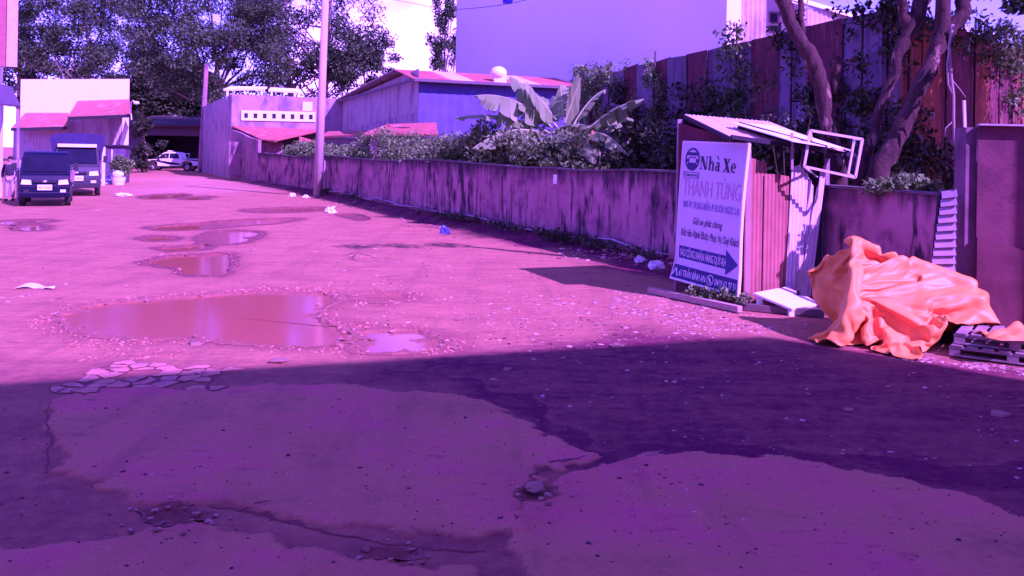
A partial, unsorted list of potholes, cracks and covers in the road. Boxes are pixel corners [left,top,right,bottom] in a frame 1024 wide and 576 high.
pothole [338,327,456,355]
pothole [132,252,241,277]
crack [210,500,485,552]
pothole [142,218,306,231]
pothole [49,288,373,349]
pothole [515,478,573,505]
pothole [149,243,218,252]
pothole [190,229,268,245]
